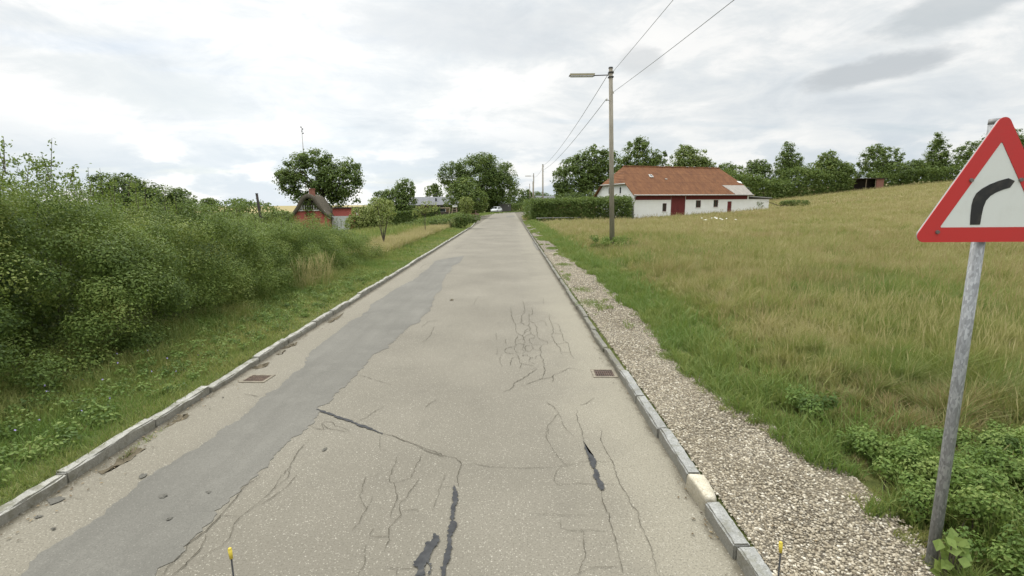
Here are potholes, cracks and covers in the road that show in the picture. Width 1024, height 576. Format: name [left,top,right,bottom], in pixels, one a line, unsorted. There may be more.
pothole [98,447,146,474]
crack [479,399,658,575]
drain grate [238,374,275,383]
crack [163,406,384,574]
drain grate [591,369,618,378]
crack [353,457,450,575]
crack [496,298,584,391]
